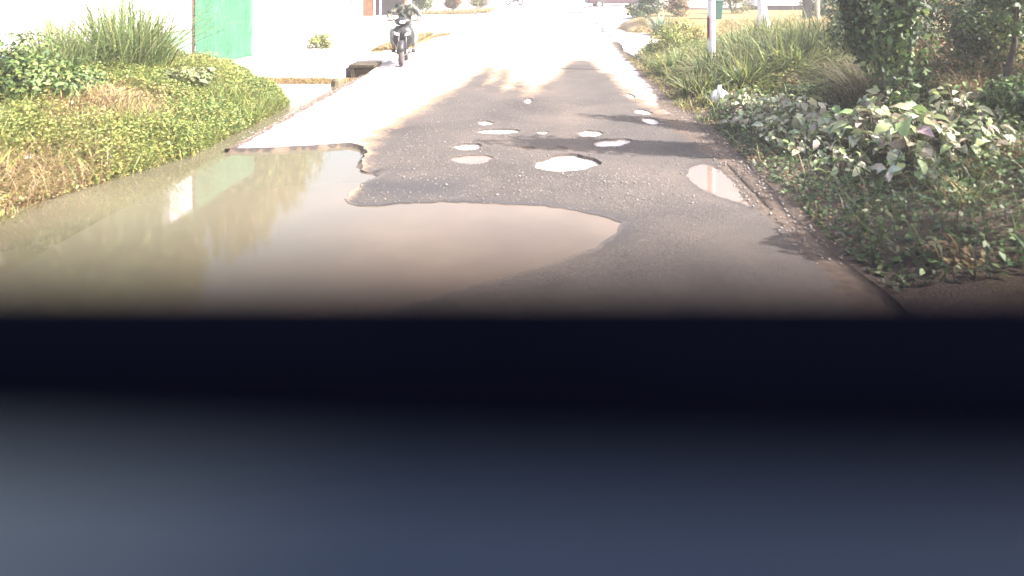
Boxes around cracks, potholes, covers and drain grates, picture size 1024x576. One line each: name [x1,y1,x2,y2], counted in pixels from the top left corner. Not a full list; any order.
pothole [686,164,752,207]
pothole [29,142,622,260]
pothole [592,138,633,147]
